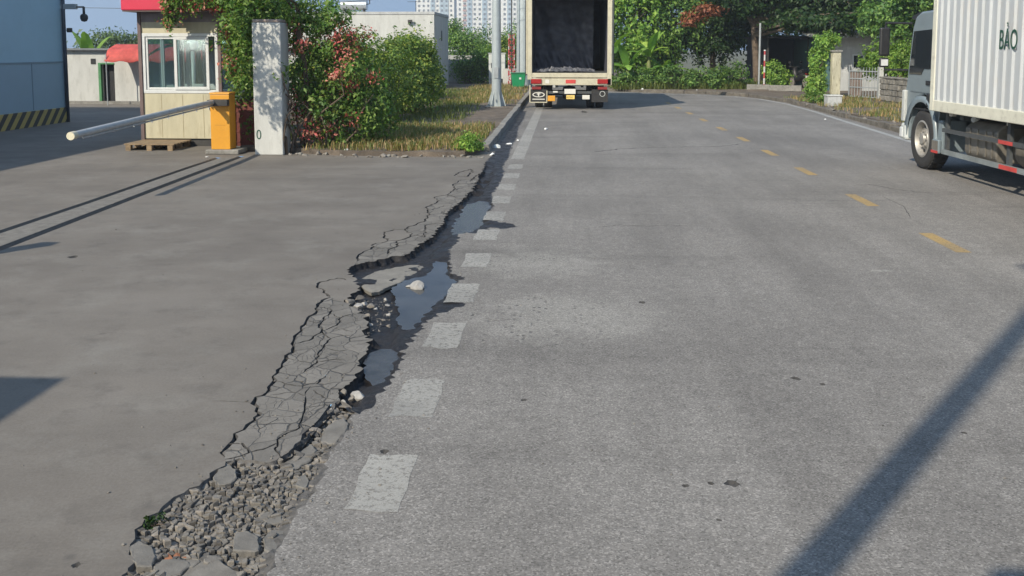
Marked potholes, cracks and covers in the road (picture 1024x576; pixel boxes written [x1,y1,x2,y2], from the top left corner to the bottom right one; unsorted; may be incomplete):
crack [356,169,485,261]
crack [220,278,354,463]
pothole [122,401,359,576]
pothole [335,111,527,414]
